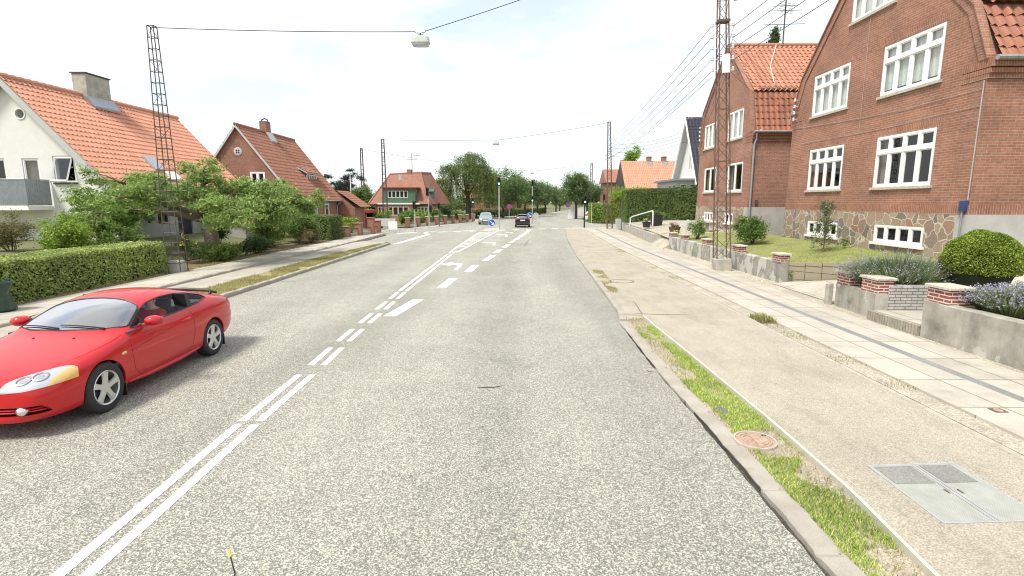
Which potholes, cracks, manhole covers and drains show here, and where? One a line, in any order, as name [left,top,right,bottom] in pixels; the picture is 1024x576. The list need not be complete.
manhole cover [733,431,778,452]
utility cover [868,462,1024,524]
